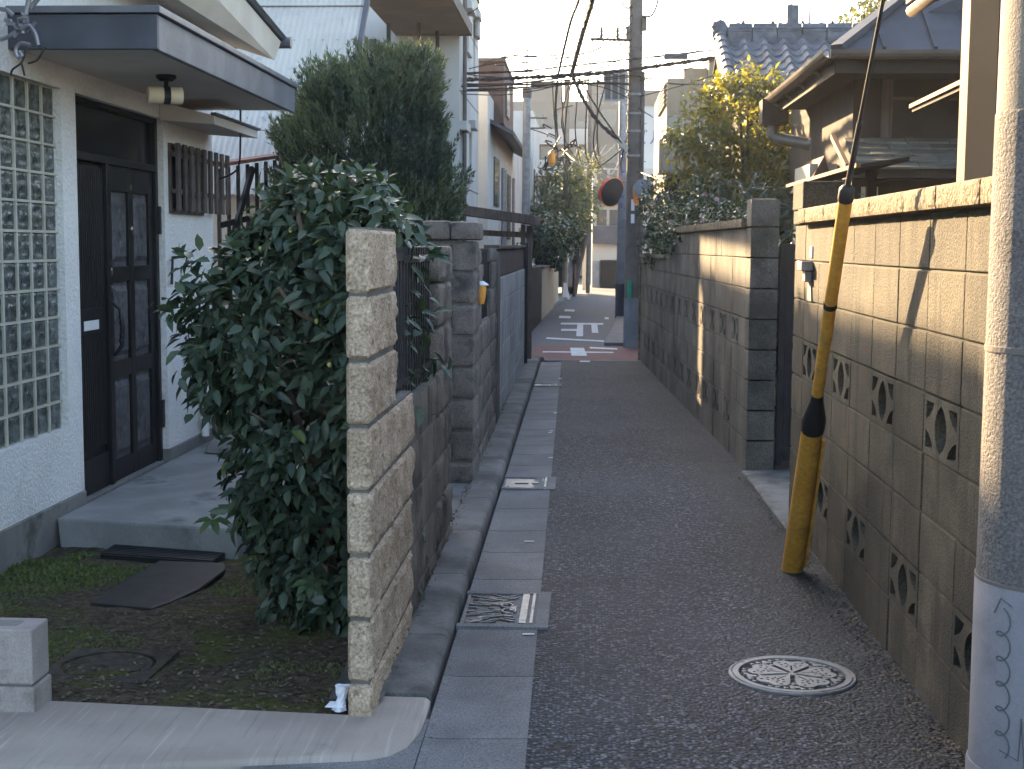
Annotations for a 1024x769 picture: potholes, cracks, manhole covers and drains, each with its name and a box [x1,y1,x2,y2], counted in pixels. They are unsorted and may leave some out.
manhole cover [48,647,179,684]
manhole cover [500,476,556,493]
manhole cover [728,655,857,696]
